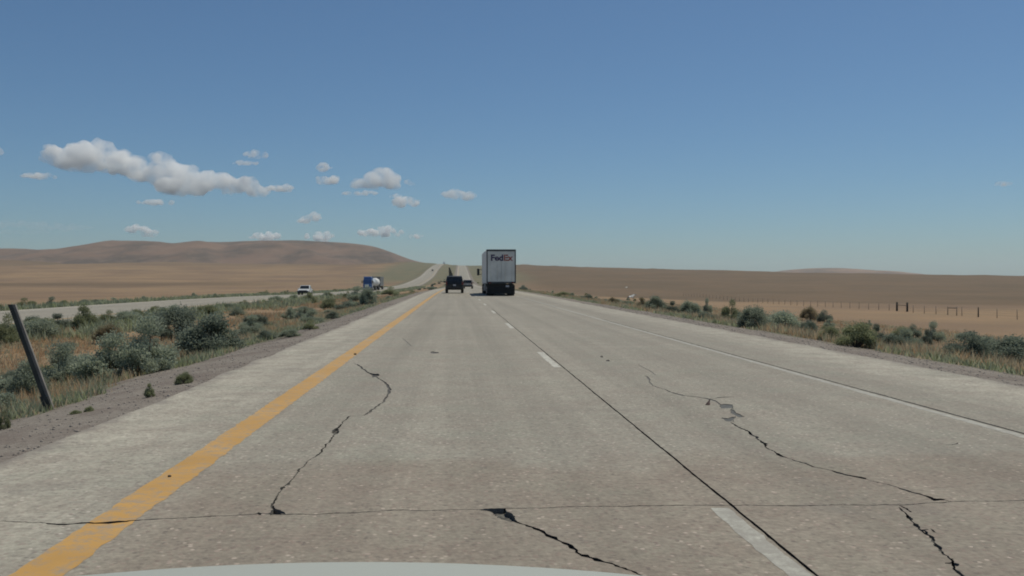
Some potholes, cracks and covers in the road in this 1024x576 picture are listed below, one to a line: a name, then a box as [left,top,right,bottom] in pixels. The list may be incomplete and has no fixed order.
crack [256,364,392,515]
crack [639,365,964,576]
crack [480,508,642,576]
